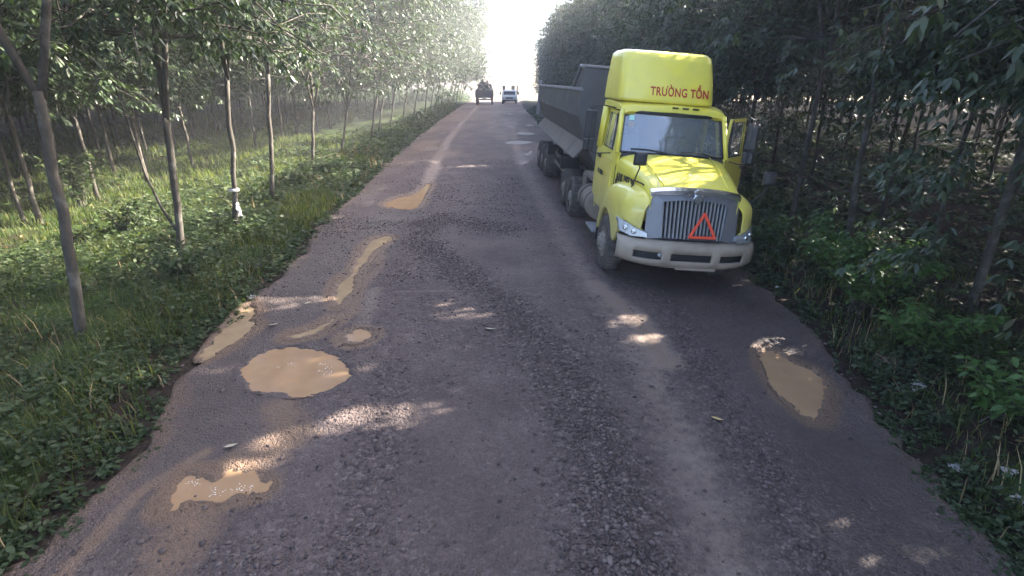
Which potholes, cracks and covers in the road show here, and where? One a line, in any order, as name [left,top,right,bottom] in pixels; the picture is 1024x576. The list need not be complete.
pothole [154,461,277,519]
pothole [281,314,346,341]
pothole [230,342,361,400]
pothole [754,346,836,425]
pothole [327,234,396,309]
pothole [339,326,377,346]
pothole [379,183,435,210]
pothole [192,301,261,363]
